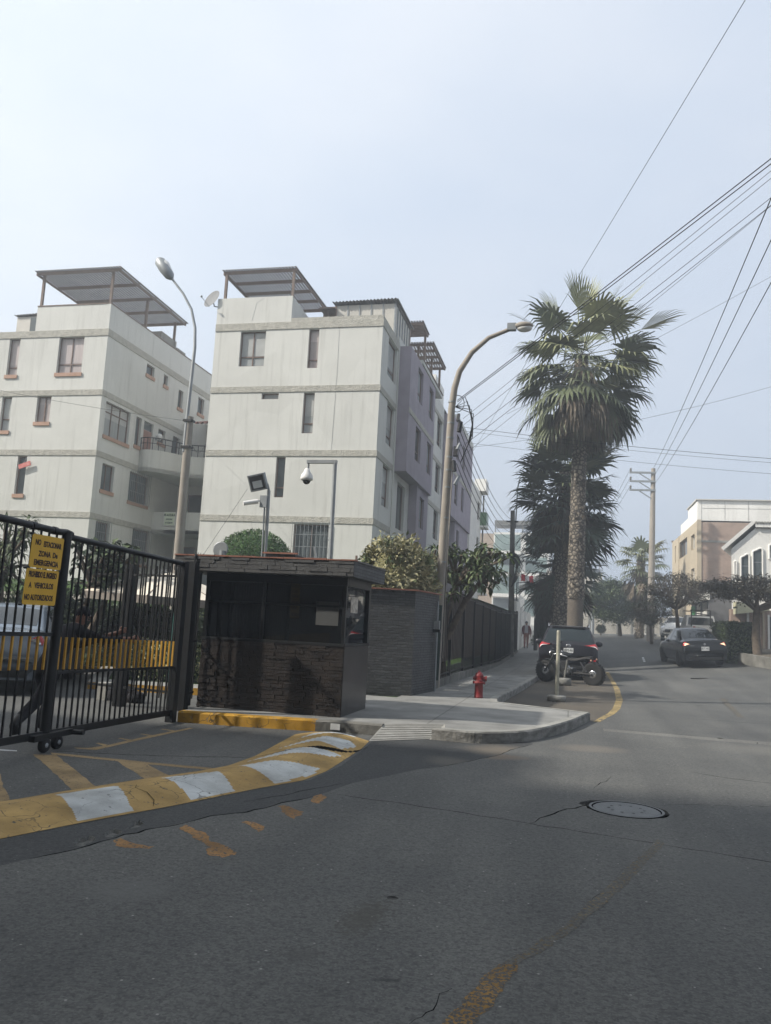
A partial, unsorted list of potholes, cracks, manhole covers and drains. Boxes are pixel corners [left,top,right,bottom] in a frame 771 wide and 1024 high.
crack [339,794,769,862]
manhole cover [579,800,670,819]
